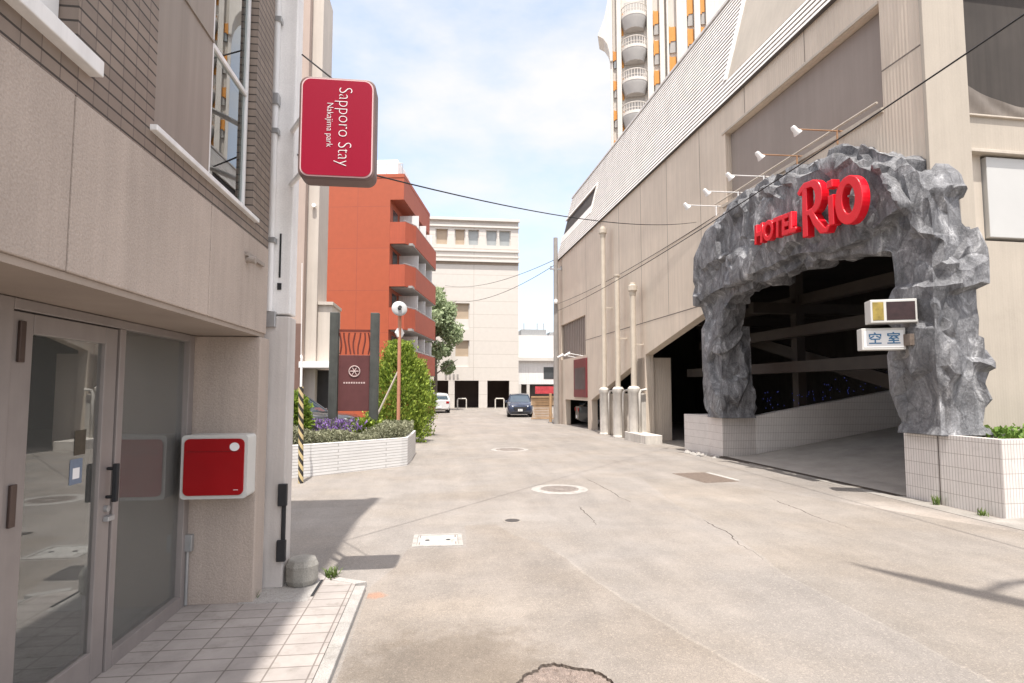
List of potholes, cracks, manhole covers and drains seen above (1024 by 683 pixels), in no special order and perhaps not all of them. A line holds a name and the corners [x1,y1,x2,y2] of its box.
utility cover [412,533,463,547]
pothole [516,662,614,683]
manhole cover [531,484,588,494]
